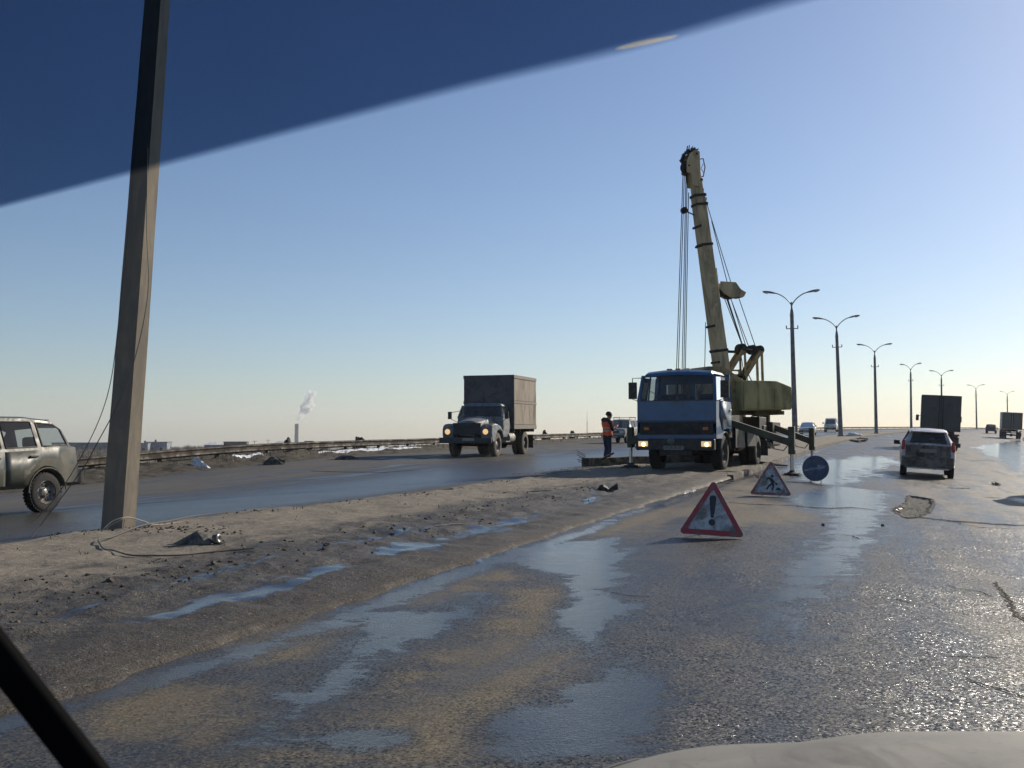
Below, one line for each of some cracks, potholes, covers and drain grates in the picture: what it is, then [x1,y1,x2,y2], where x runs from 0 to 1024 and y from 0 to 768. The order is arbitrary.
pothole [890,495,937,518]
crack [893,510,1024,529]
crack [965,677,1024,697]
crack [948,582,1024,620]
